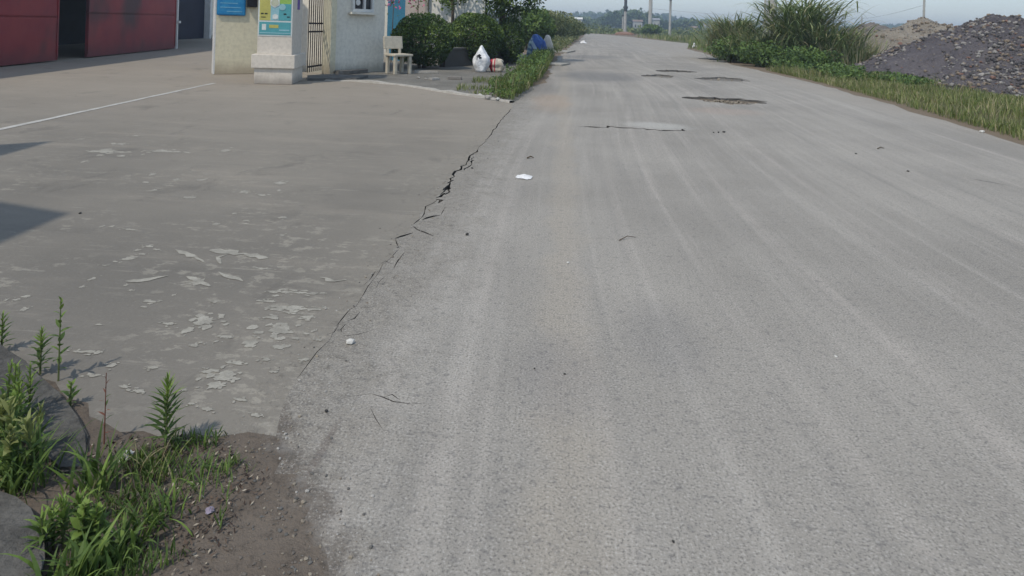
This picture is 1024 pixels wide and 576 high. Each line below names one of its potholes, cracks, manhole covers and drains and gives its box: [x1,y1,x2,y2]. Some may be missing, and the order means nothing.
pothole [682,96,767,105]
crack [296,109,511,380]
crack [342,393,432,431]
